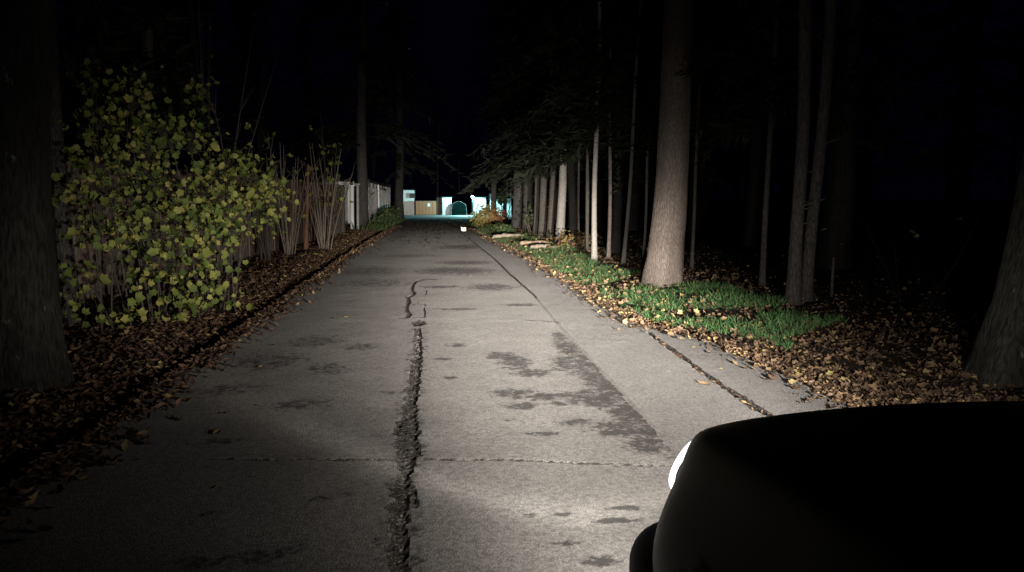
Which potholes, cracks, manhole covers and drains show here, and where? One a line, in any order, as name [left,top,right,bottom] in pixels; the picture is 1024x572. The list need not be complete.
crack [210,279,673,572]
